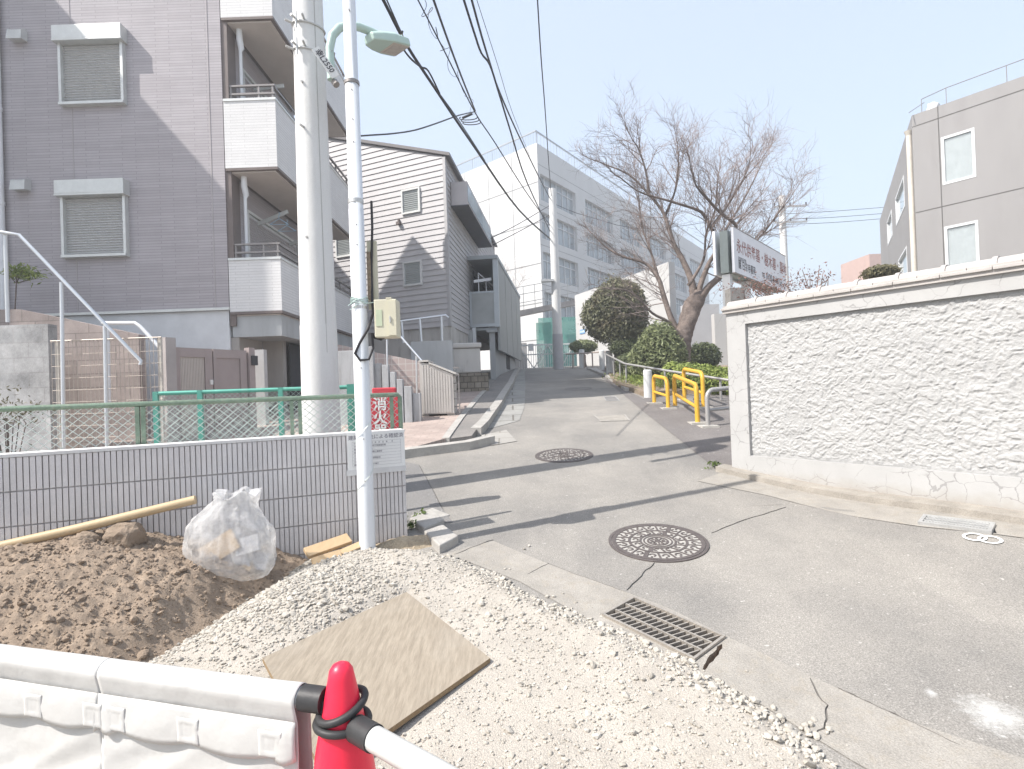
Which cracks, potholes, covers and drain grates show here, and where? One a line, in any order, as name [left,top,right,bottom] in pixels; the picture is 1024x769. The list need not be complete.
crack [810,678,960,745]
drain grate [917,514,996,535]
manhole cover [609,523,709,563]
manhole cover [535,448,593,463]
drain grate [602,596,726,661]
crack [712,507,786,533]
